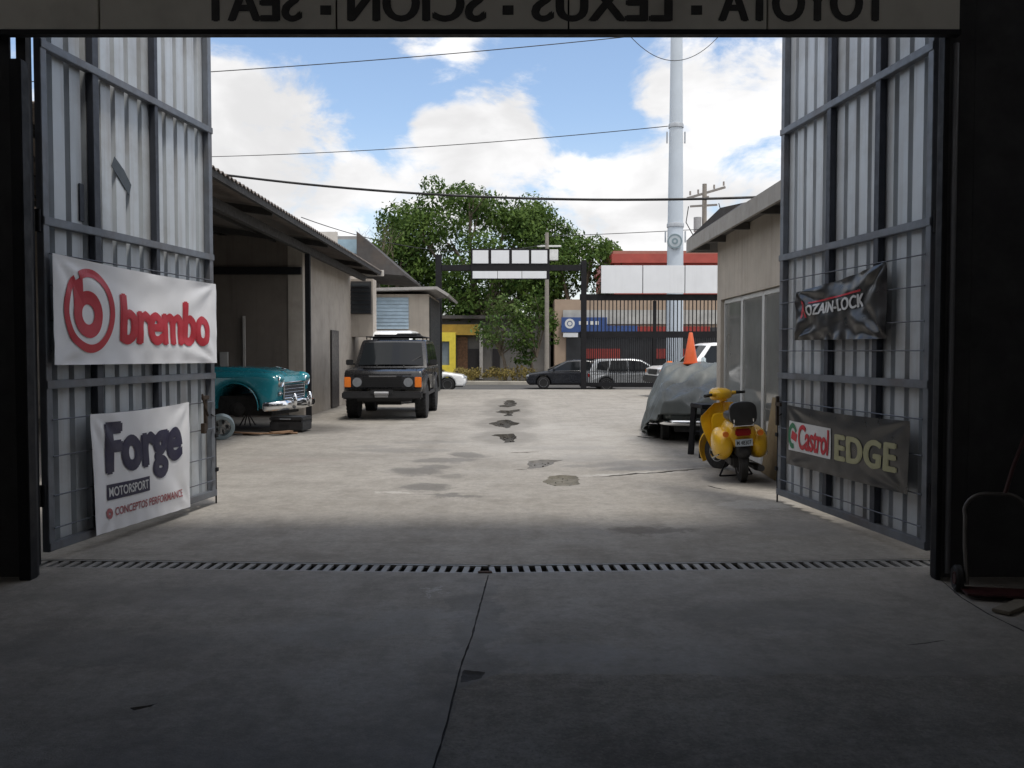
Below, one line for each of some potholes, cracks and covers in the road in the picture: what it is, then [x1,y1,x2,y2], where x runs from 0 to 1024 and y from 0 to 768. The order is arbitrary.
drain grate [39,559,490,573]
pothole [543,475,580,486]
pothole [491,434,517,443]
crack [600,469,726,490]
pothole [527,460,561,469]
drain grate [478,559,930,573]
pothole [489,420,519,428]
